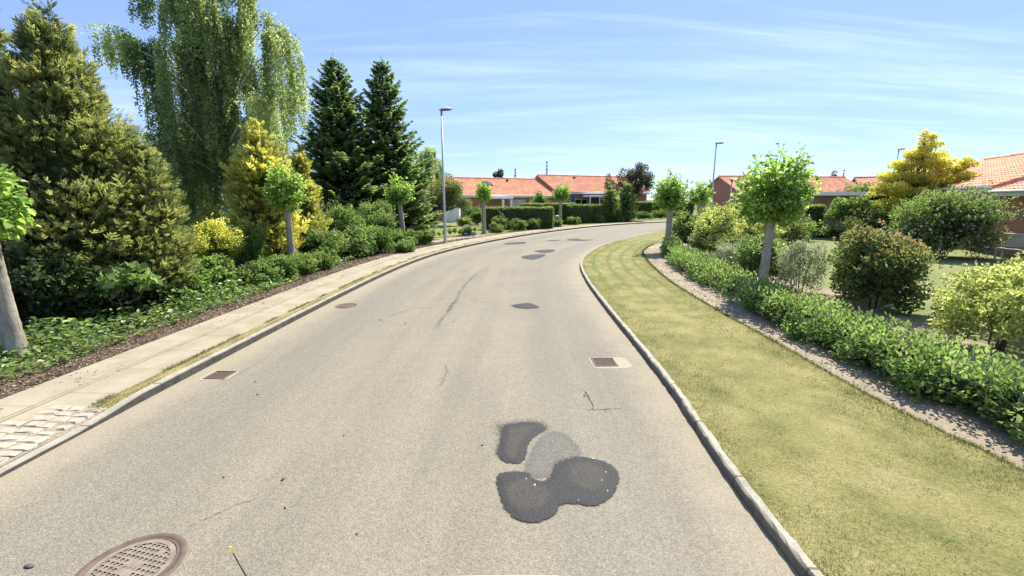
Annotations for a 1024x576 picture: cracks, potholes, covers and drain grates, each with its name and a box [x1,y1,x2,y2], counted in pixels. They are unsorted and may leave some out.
manhole cover [74,533,188,576]
drain grate [589,357,632,368]
drain grate [199,370,239,380]
